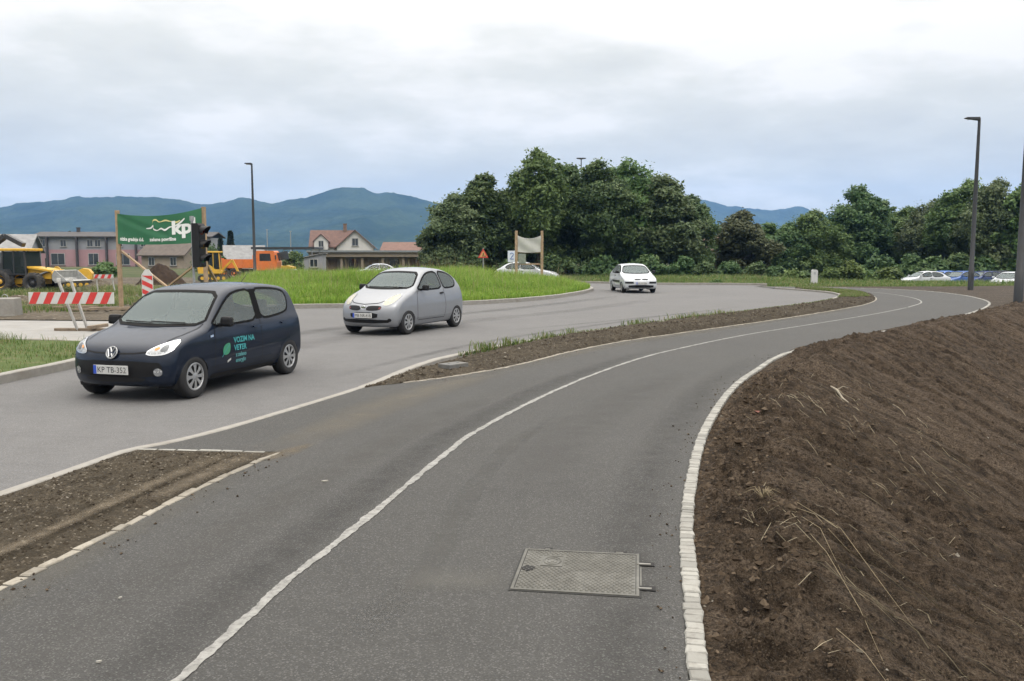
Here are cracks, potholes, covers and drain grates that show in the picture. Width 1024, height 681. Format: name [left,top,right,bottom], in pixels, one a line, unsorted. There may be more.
manhole cover [508,547,656,598]
